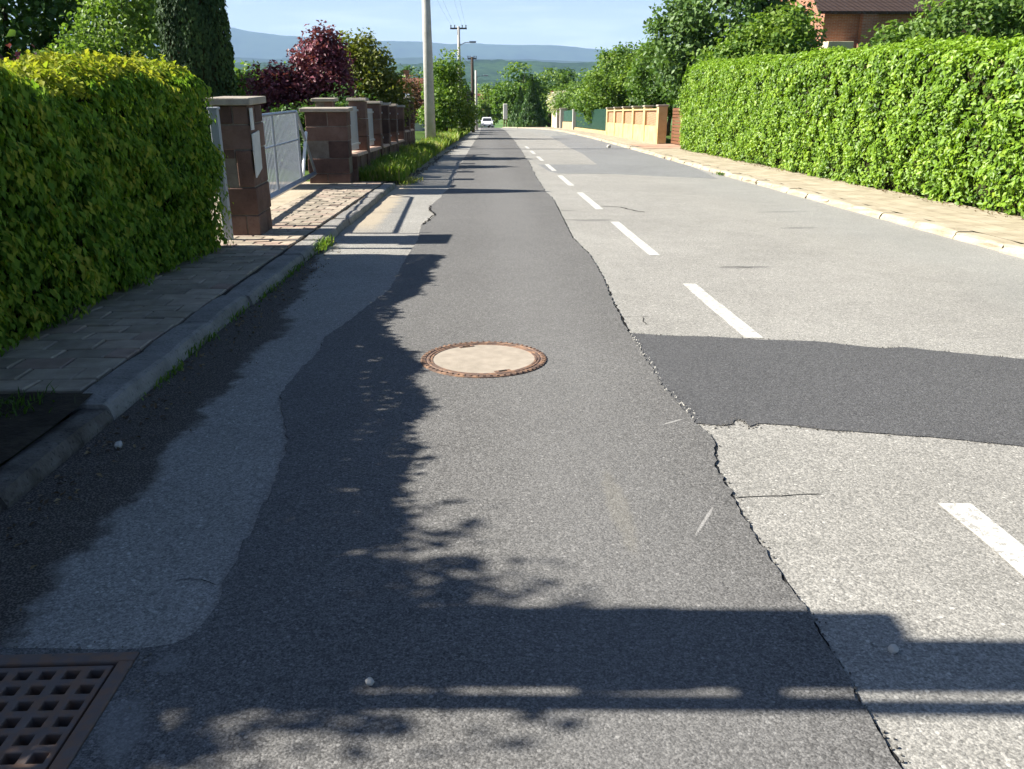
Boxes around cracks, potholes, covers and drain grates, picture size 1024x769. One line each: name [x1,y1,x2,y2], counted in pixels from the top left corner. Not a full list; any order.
manhole cover [421,341,547,378]
drain grate [0,652,139,769]
